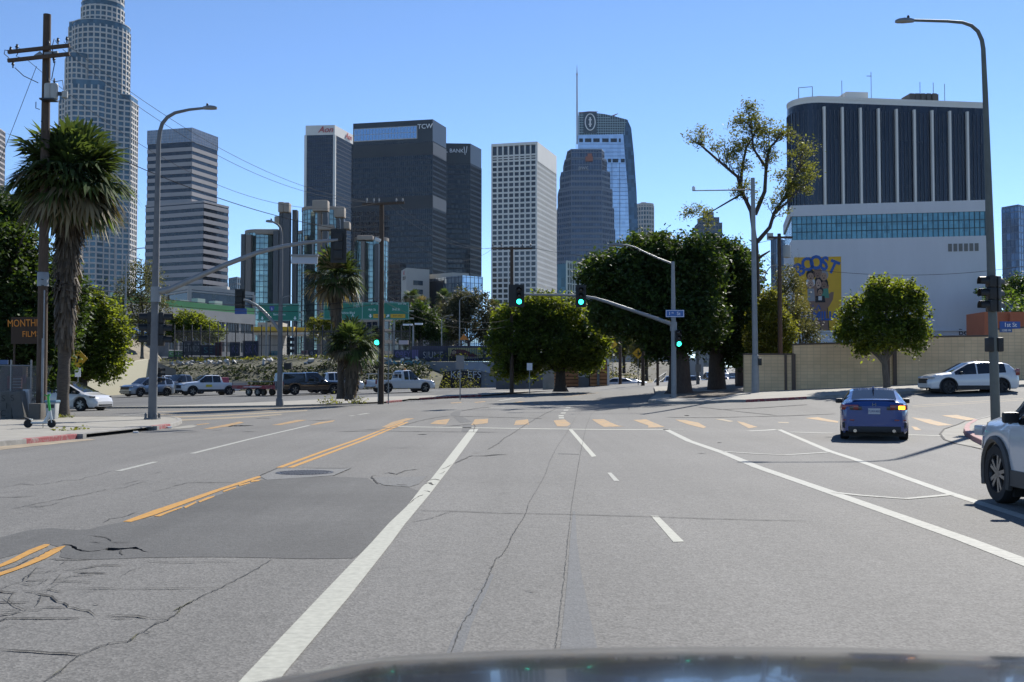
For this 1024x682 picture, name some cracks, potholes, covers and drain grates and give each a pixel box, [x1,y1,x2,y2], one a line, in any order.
crack [371,408,760,652]
crack [7,471,190,509]
crack [0,513,270,682]
manhole cover [261,468,350,480]
